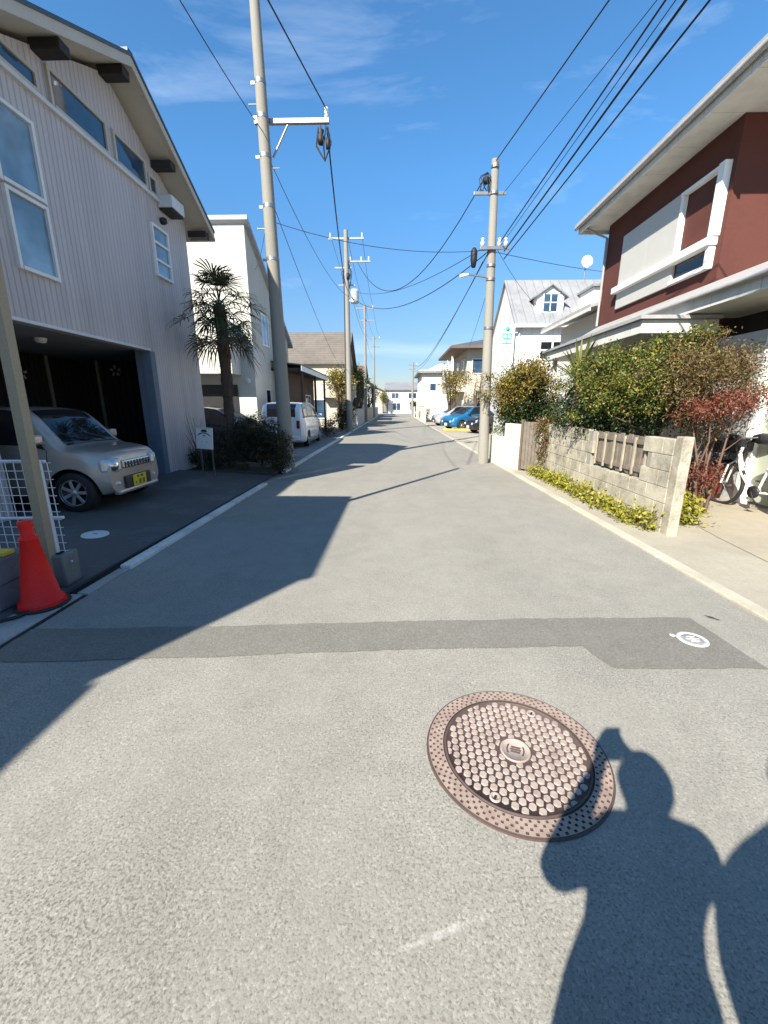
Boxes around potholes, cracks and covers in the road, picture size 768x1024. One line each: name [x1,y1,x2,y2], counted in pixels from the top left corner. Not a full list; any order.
utility cover [80,530,110,539]
manhole cover [427,691,616,843]
